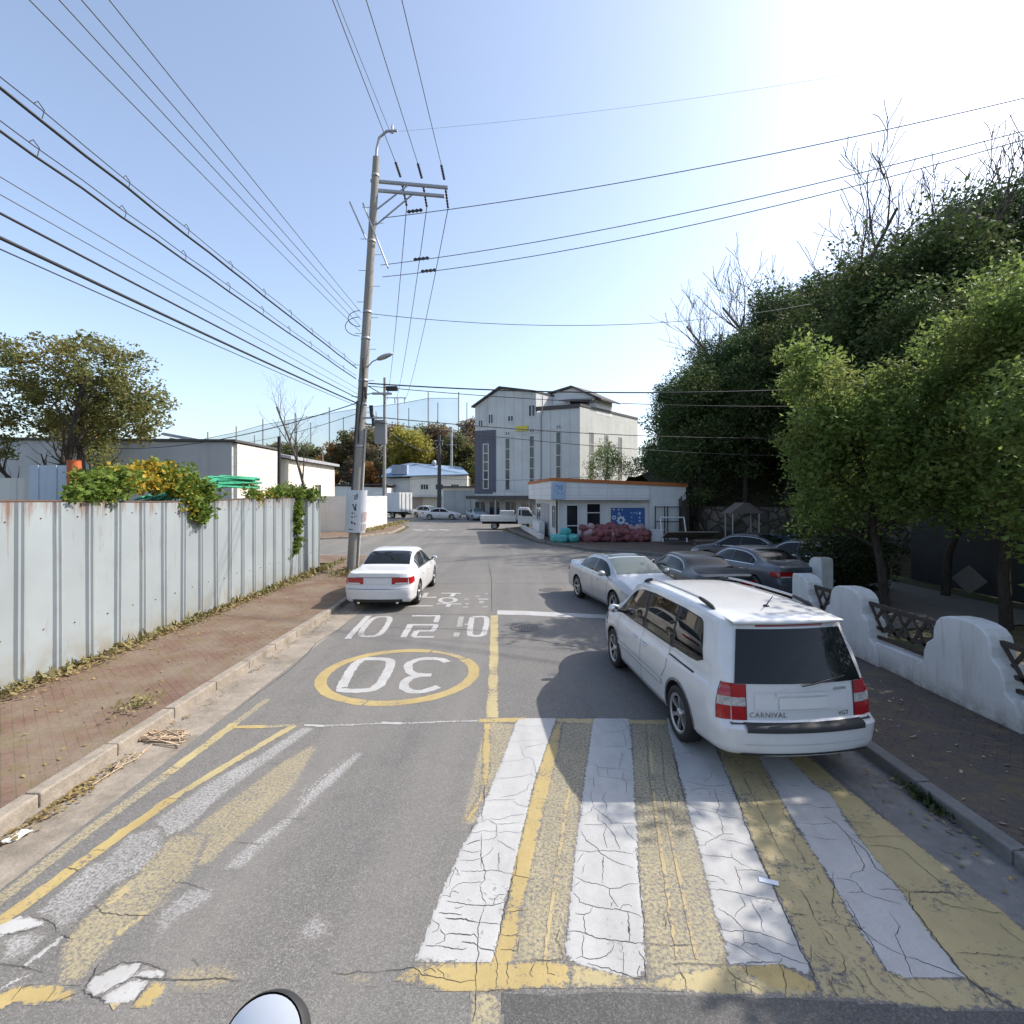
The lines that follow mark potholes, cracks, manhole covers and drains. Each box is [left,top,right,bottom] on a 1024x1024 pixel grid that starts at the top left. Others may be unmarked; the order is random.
manhole cover [510,624,539,632]
